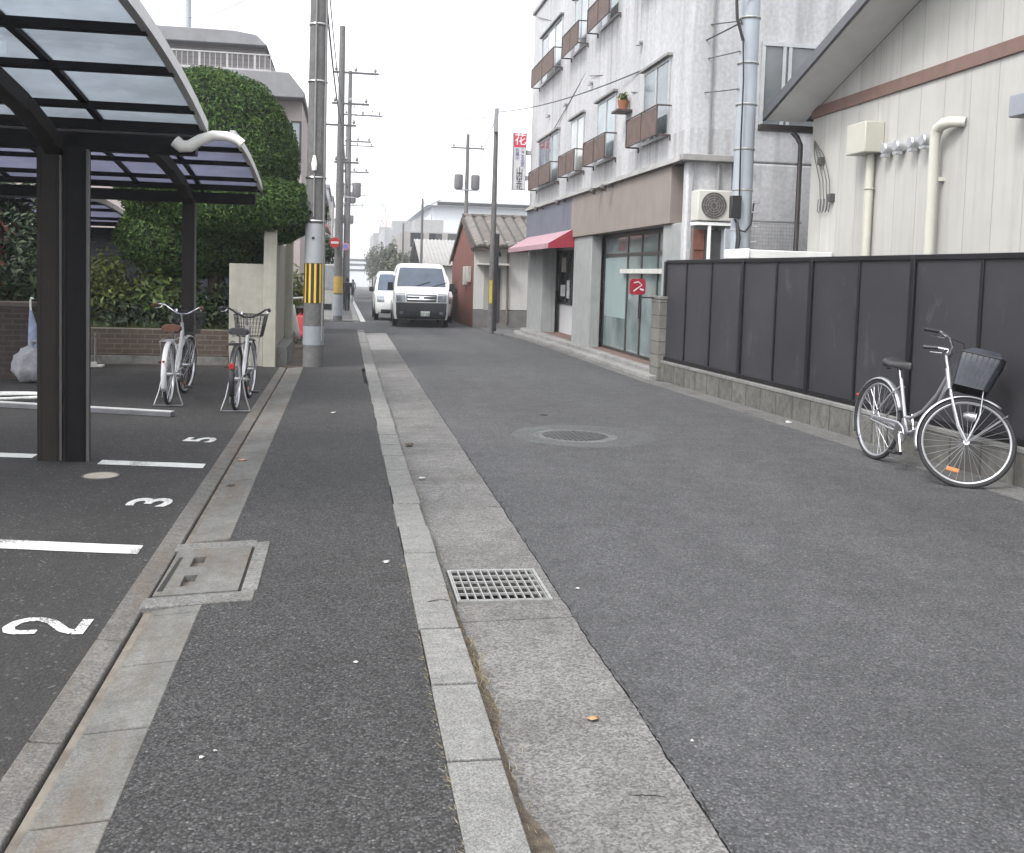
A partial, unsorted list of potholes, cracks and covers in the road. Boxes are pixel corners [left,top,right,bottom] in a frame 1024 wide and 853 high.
manhole cover [512,425,656,448]
drain grate [447,568,553,605]
